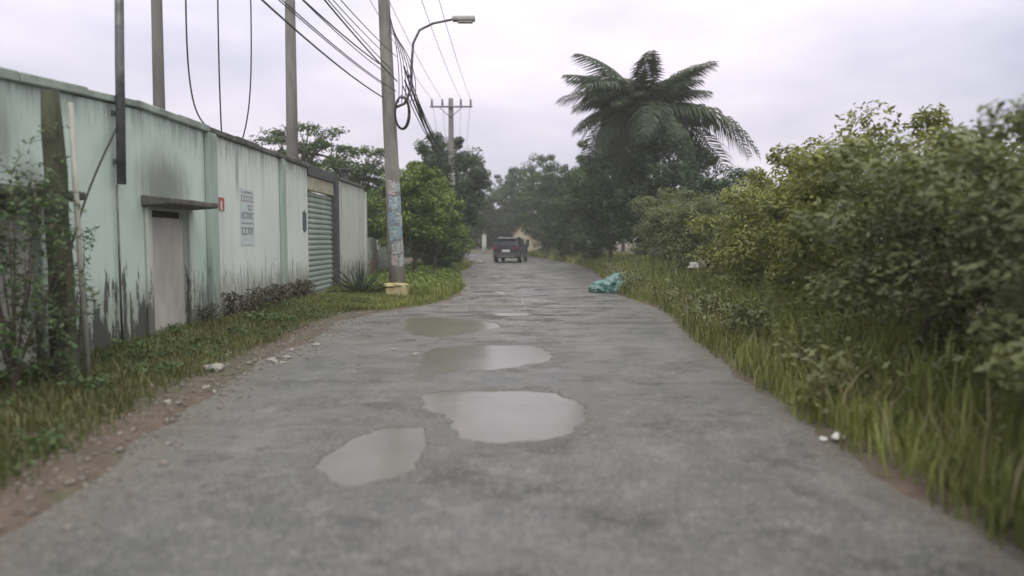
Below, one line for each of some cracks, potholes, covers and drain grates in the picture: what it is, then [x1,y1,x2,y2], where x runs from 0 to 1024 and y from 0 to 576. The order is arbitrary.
pothole [311,426,428,486]
pothole [419,389,591,443]
pothole [411,344,555,381]
pothole [397,317,502,337]
